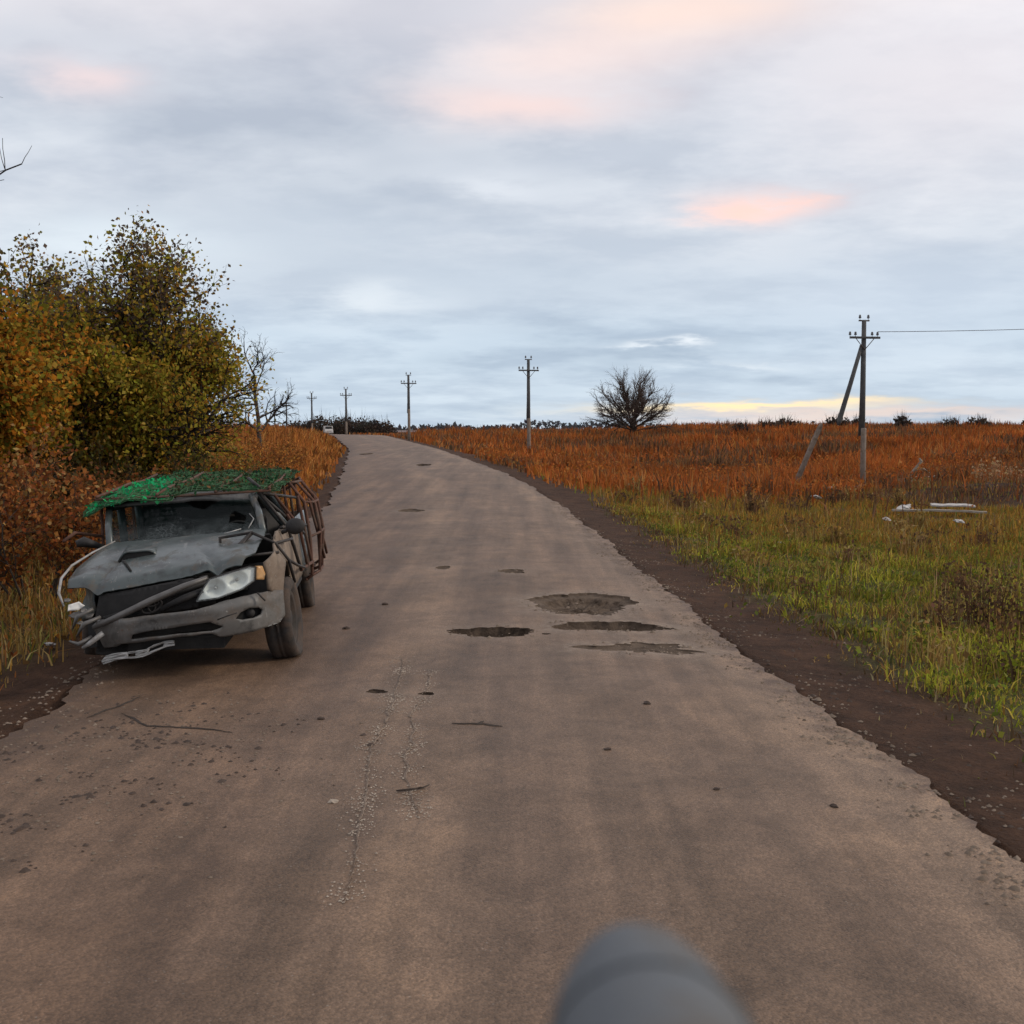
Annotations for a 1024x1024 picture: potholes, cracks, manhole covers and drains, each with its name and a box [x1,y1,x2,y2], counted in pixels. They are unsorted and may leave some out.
pothole [521,591,645,616]
pothole [571,639,707,655]
pothole [550,620,677,633]
crack [318,658,447,908]
pothole [447,625,534,639]
crack [87,697,232,733]
